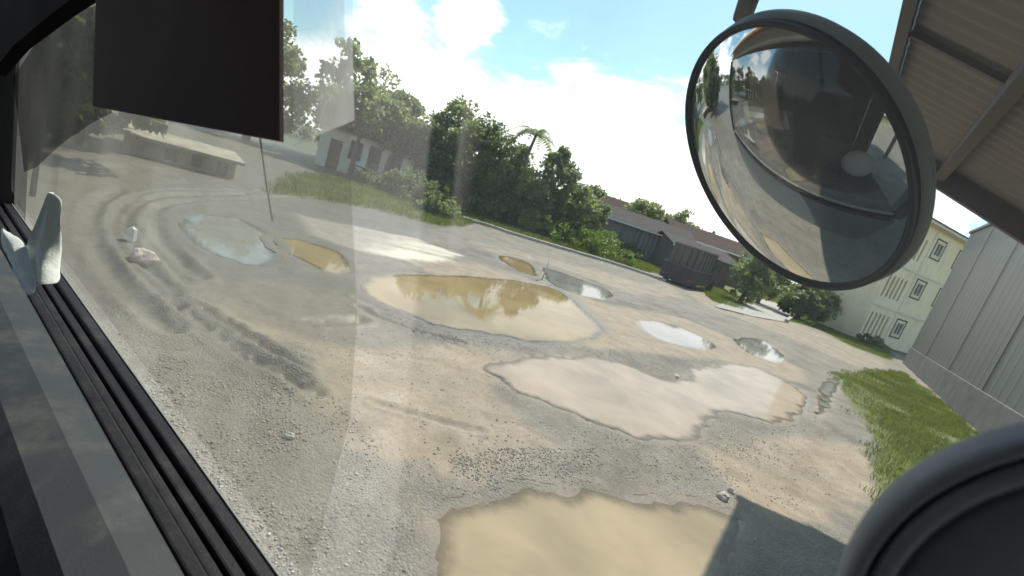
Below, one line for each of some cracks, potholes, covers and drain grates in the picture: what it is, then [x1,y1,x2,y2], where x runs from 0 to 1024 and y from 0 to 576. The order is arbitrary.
pothole [348,270,611,347]
pothole [802,373,847,427]
pothole [260,233,362,278]
pothole [164,210,292,270]
pothole [630,317,723,353]
pothole [537,265,618,301]
pothole [727,334,791,365]
pothole [468,349,819,450]
pothole [397,471,763,576]
pothole [493,254,542,277]
